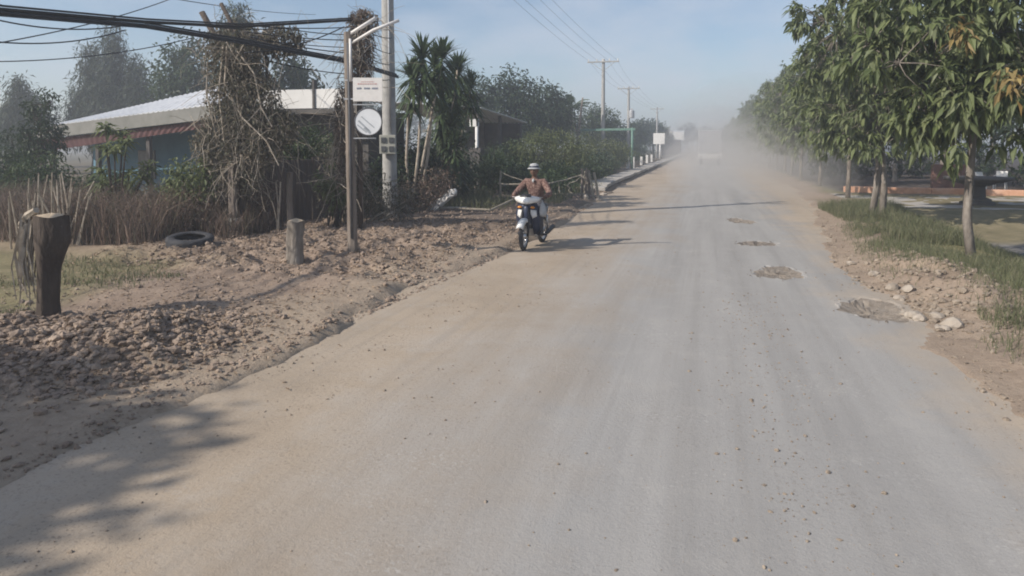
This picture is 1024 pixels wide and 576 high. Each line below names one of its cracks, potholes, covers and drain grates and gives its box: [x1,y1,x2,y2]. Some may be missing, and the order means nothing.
pothole [833,296,913,324]
pothole [749,265,808,281]
